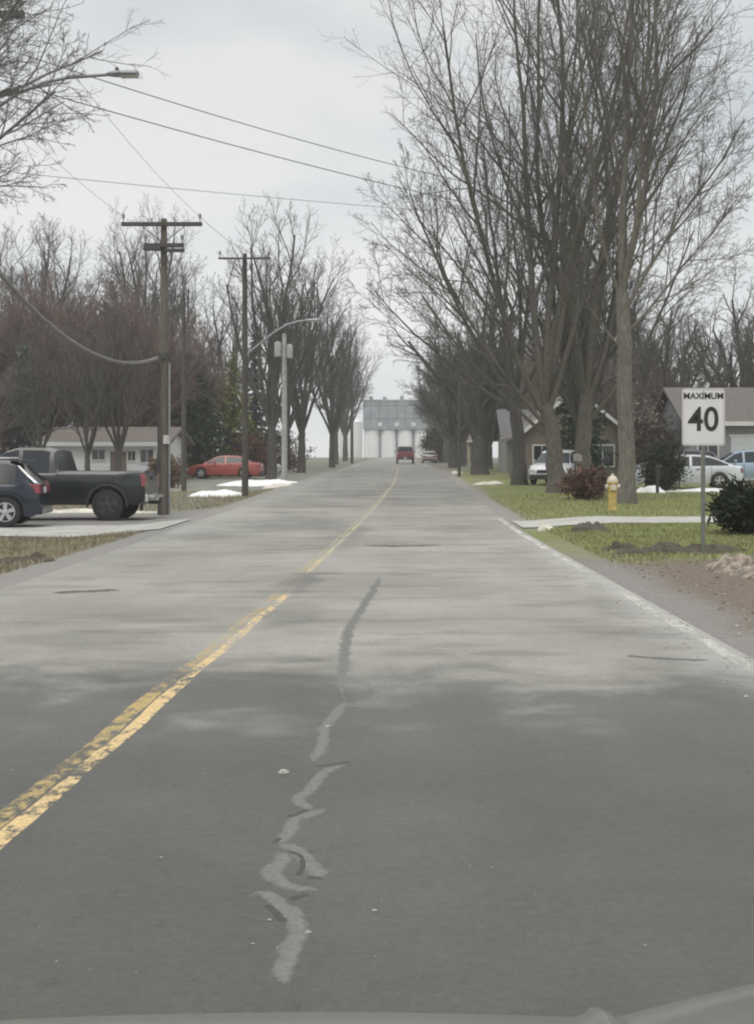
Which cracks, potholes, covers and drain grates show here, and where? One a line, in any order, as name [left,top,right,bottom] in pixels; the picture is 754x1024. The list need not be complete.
crack [247,574,382,987]
